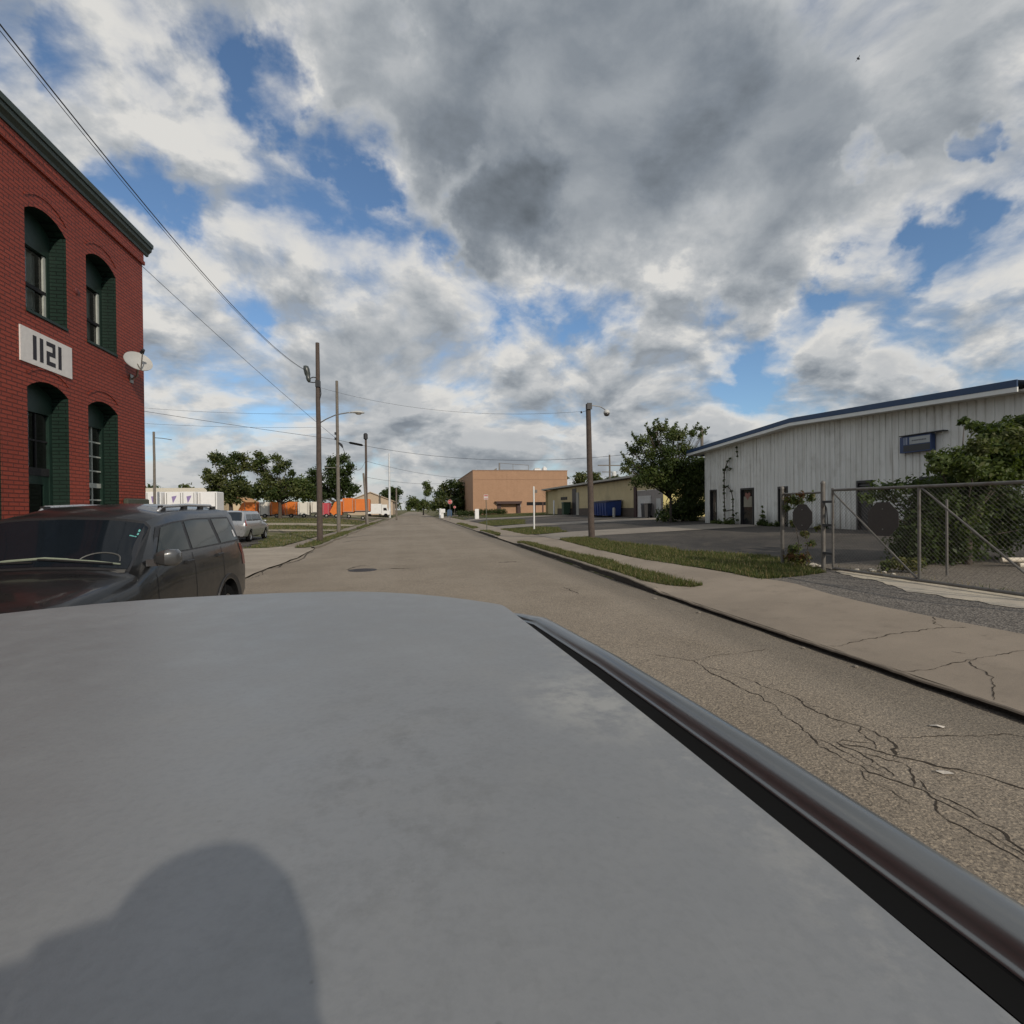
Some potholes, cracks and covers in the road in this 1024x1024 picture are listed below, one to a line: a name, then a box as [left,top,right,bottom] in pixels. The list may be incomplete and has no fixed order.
crack [650,649,1024,861]
